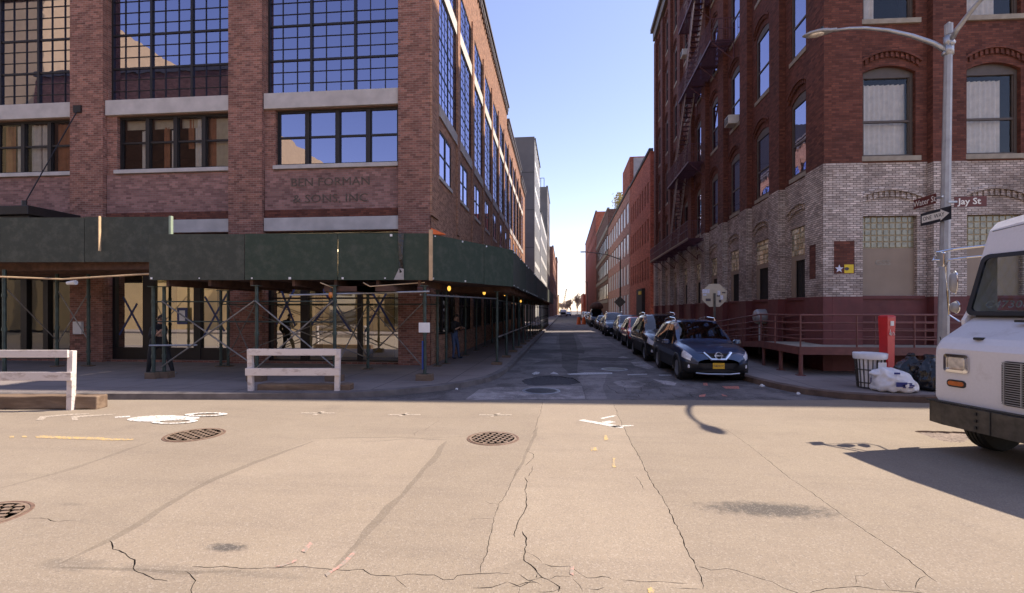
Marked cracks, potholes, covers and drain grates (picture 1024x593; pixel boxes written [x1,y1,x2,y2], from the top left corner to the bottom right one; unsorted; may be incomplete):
crack [185,377,797,593]
crack [110,541,167,581]
